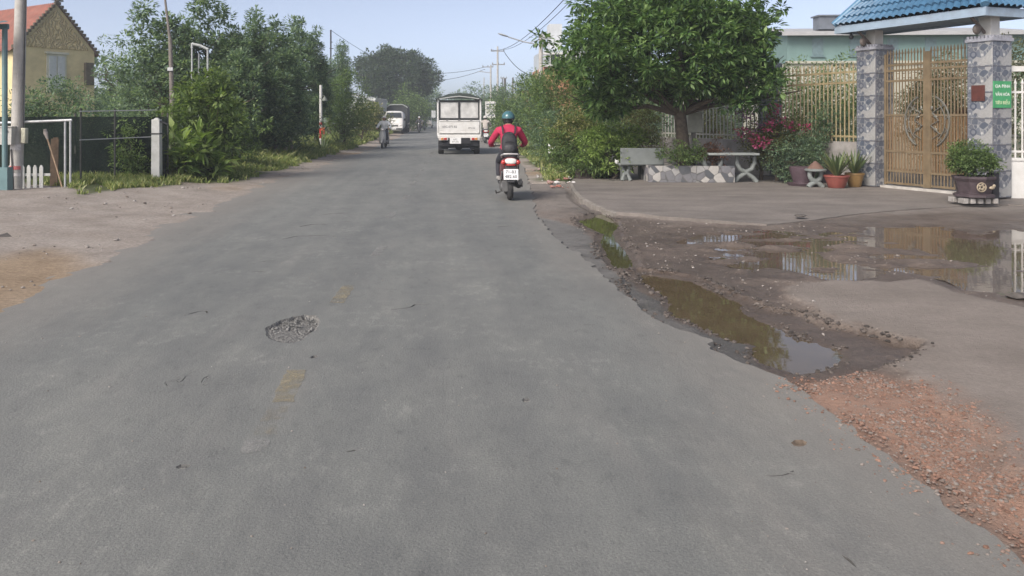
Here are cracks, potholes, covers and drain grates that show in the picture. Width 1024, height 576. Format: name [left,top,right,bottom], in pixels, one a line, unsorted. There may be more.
pothole [265,315,321,343]
pothole [621,267,925,386]
pothole [575,213,644,269]
